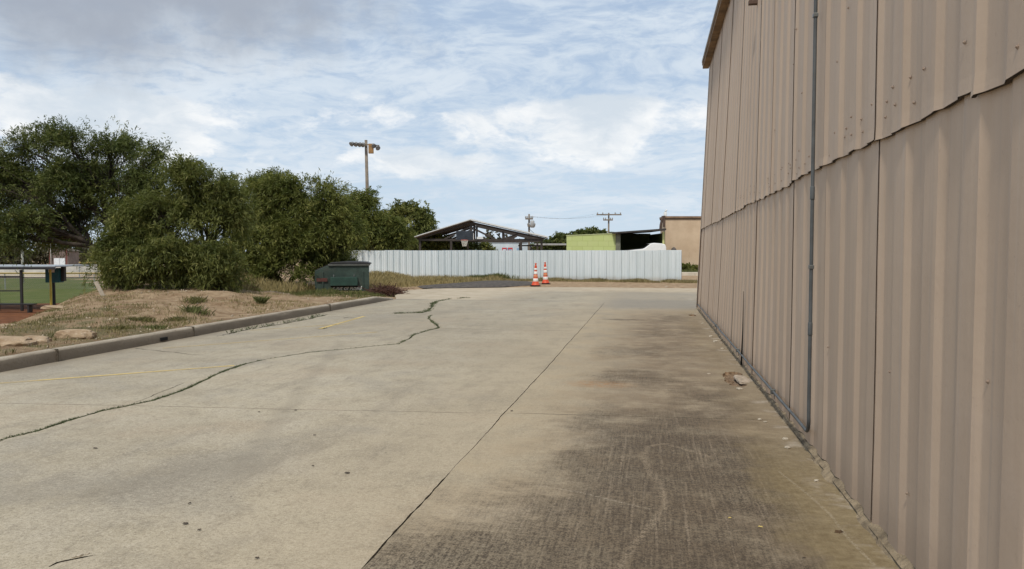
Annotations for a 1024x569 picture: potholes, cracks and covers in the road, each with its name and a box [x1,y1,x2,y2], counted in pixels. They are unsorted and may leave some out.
crack [0,297,470,441]
crack [49,555,93,567]
